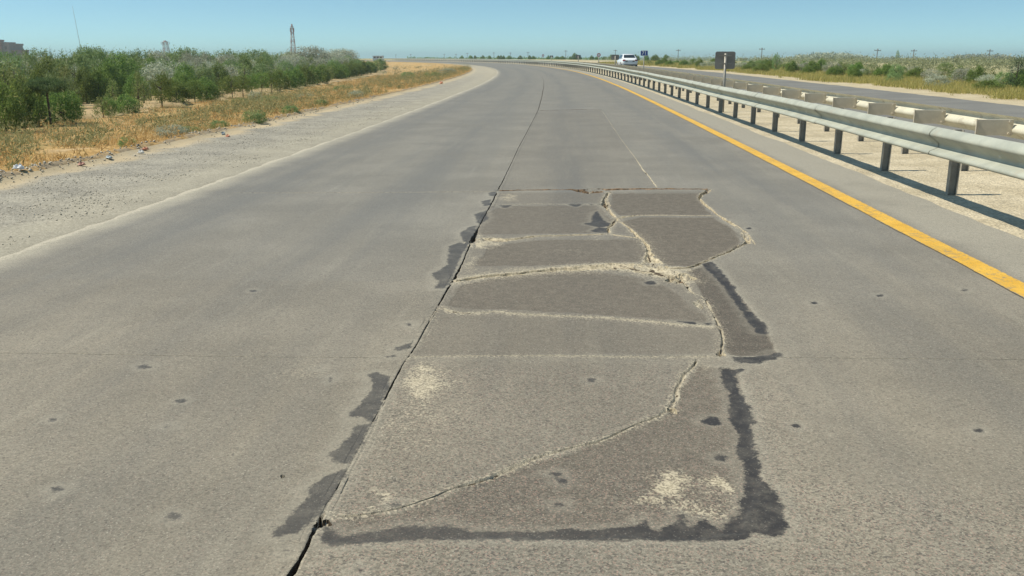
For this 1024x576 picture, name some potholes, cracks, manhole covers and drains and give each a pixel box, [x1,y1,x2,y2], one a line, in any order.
crack [278,76,754,576]
